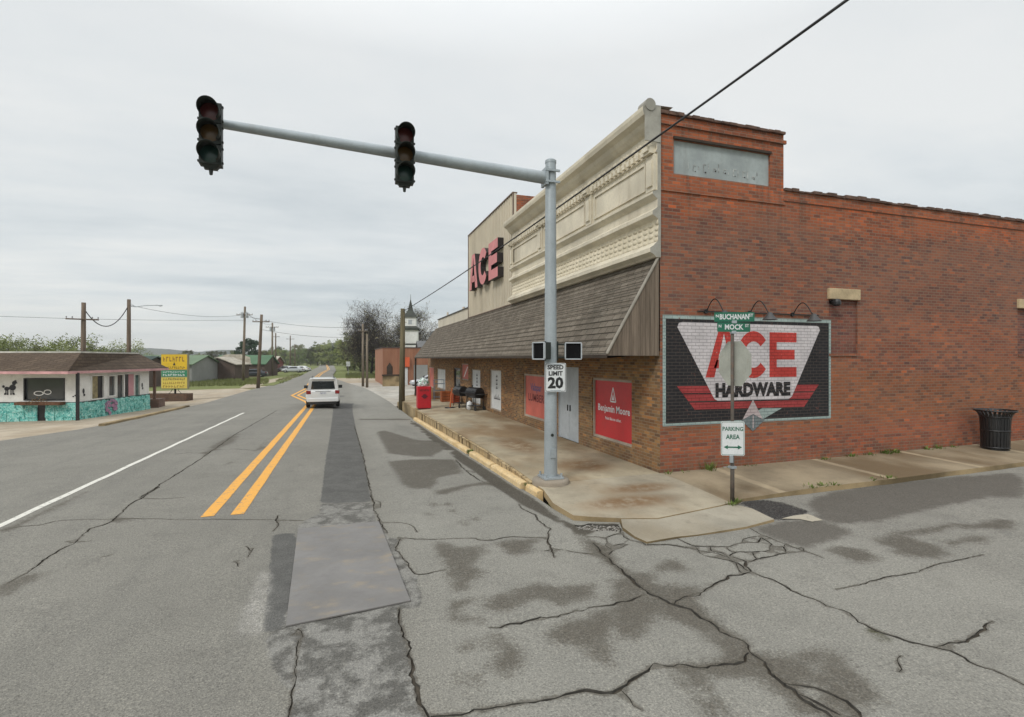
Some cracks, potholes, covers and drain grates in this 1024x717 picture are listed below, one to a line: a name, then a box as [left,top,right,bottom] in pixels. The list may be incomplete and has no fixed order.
crack [395,505,1024,717]
crack [12,412,274,581]
